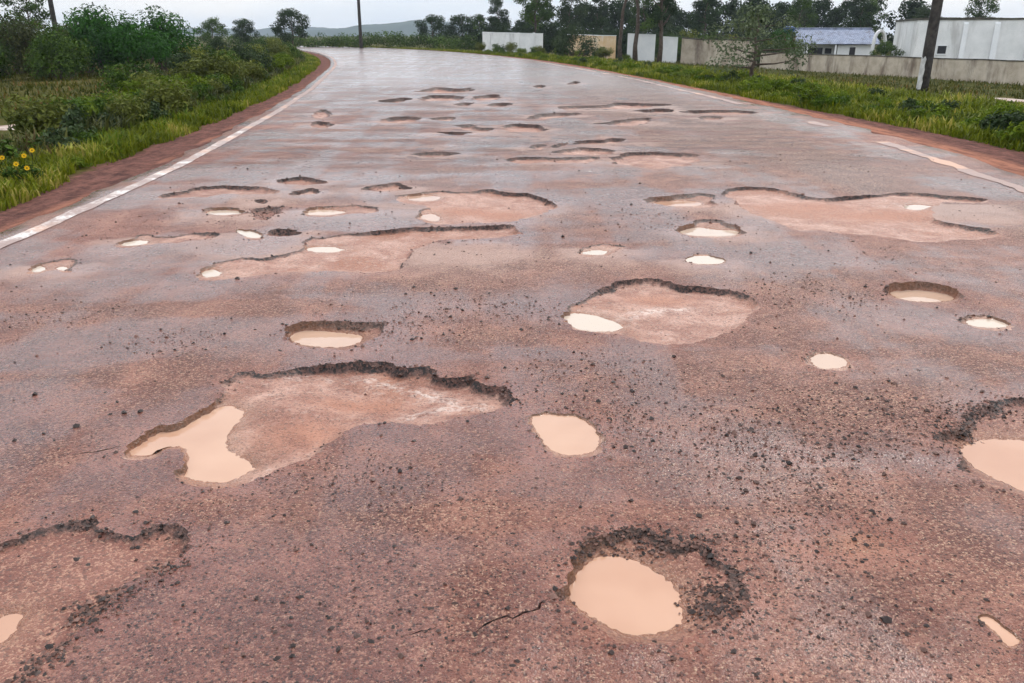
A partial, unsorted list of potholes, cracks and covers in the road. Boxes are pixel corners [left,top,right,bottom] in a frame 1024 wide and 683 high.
pothole [610,152,701,169]
pothole [883,281,966,304]
pothole [505,156,600,164]
pothole [311,109,332,118]
pothole [560,278,761,345]
pothole [26,258,78,274]
pothole [453,124,495,132]
crack [476,598,550,632]
pothole [674,219,747,238]
pothole [0,518,194,683]
pothole [804,351,854,371]
